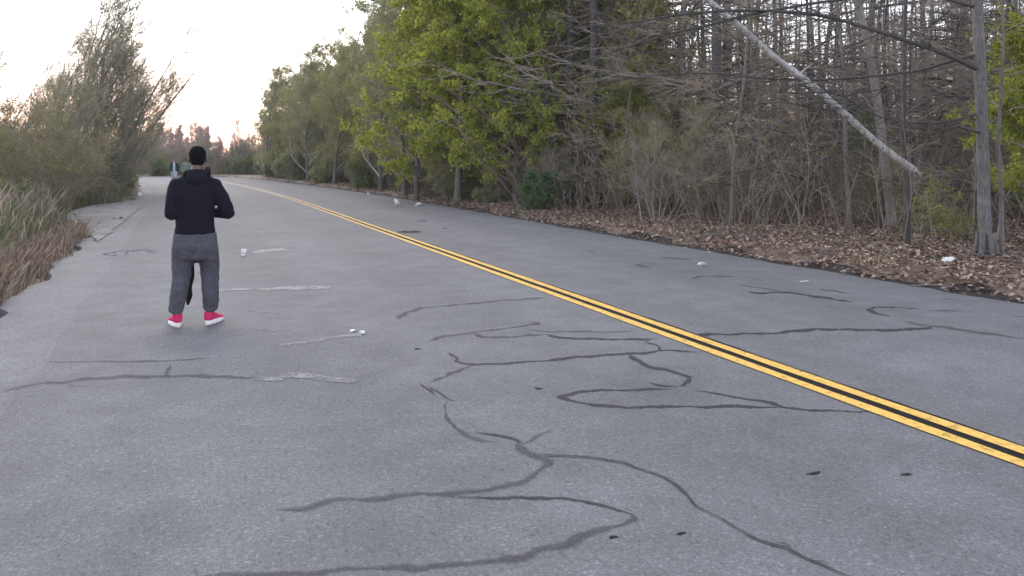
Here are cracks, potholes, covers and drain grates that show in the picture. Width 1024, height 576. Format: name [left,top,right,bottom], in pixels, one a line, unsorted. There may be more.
crack [747,289,853,302]
crack [420,383,454,401]
crack [478,432,849,576]
